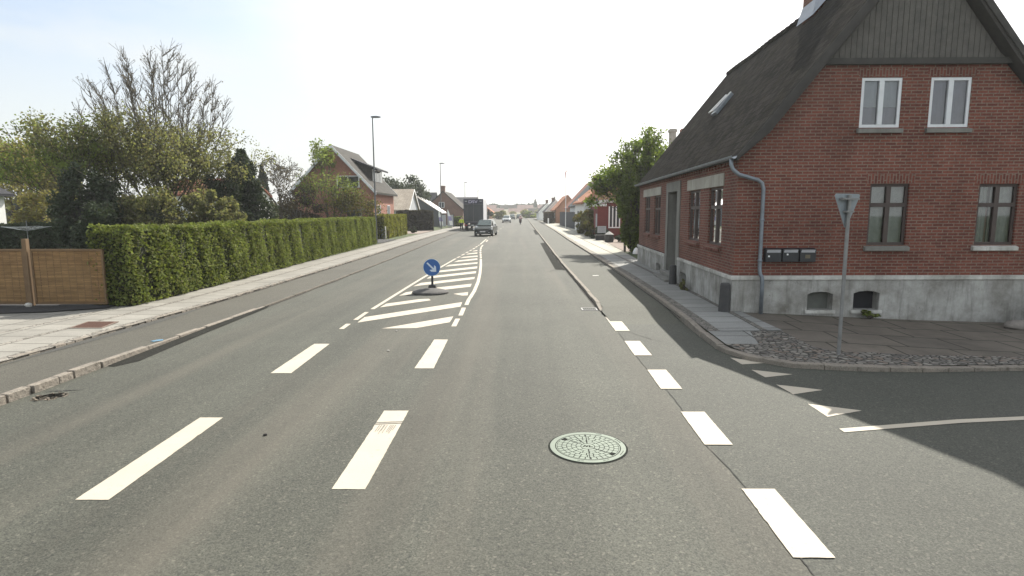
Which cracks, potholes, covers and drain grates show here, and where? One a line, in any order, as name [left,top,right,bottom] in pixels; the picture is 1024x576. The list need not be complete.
manhole cover [548,432,628,464]
pothole [30,392,70,401]
